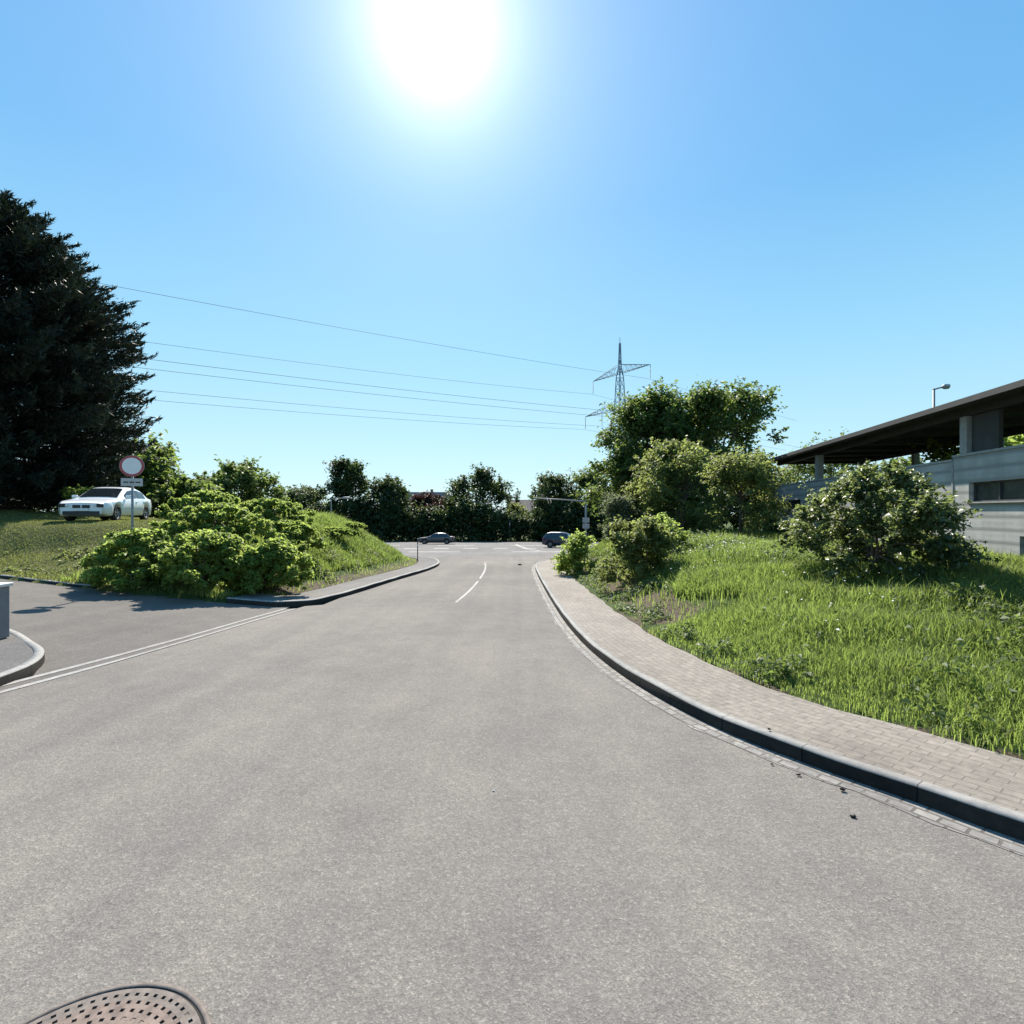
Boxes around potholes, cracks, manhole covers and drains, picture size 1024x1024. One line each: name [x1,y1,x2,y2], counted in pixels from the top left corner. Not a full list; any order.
manhole cover [21,982,211,1024]
